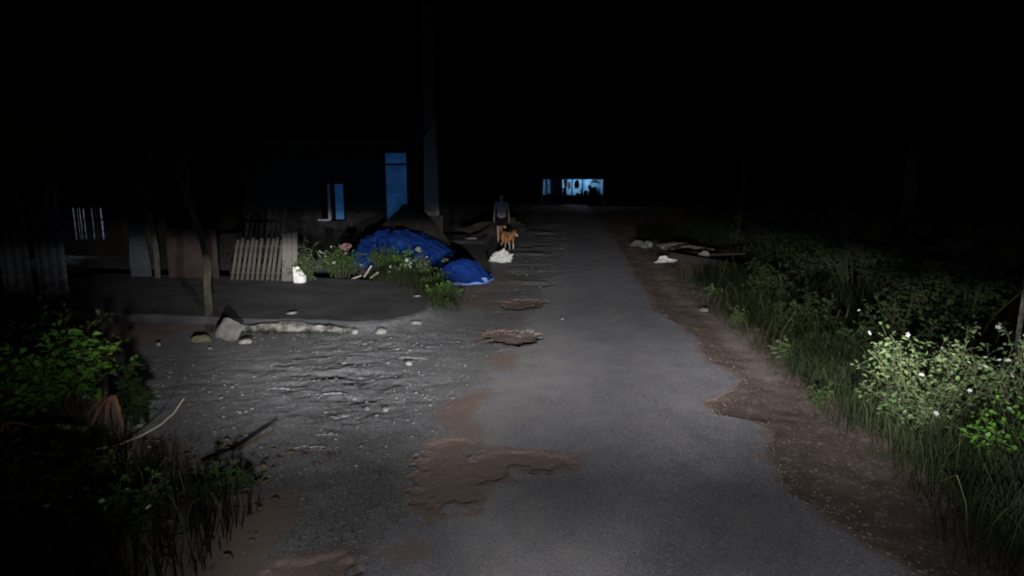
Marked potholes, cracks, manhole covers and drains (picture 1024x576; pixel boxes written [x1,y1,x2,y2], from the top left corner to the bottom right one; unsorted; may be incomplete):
crack [265,387,365,451]
pothole [473,328,540,347]
pothole [253,545,365,576]
pothole [406,436,593,525]
pothole [491,297,549,312]
